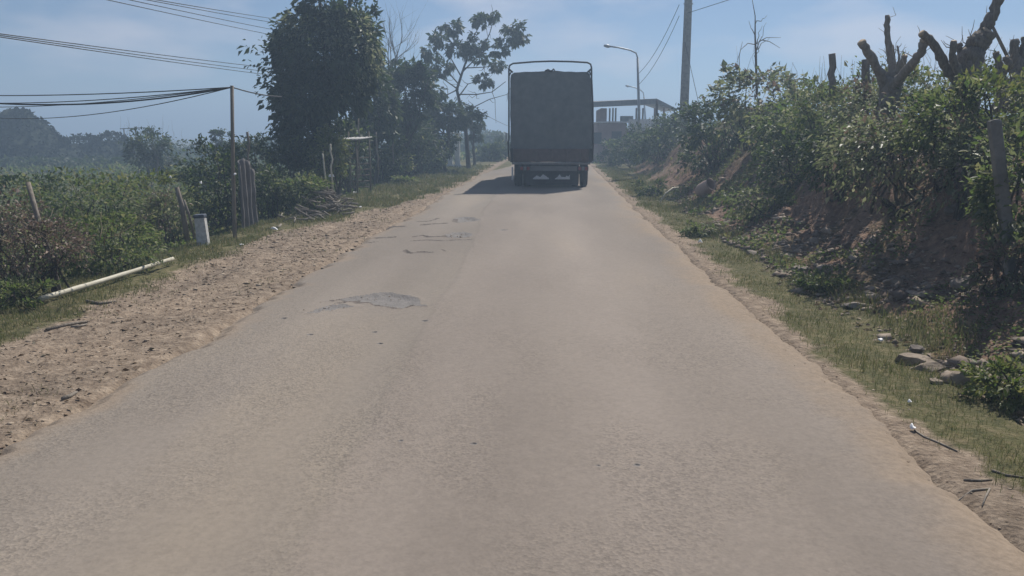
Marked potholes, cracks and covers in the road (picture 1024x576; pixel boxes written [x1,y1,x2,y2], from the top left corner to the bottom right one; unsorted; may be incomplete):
pothole [341,292,427,308]
pothole [307,304,354,313]
